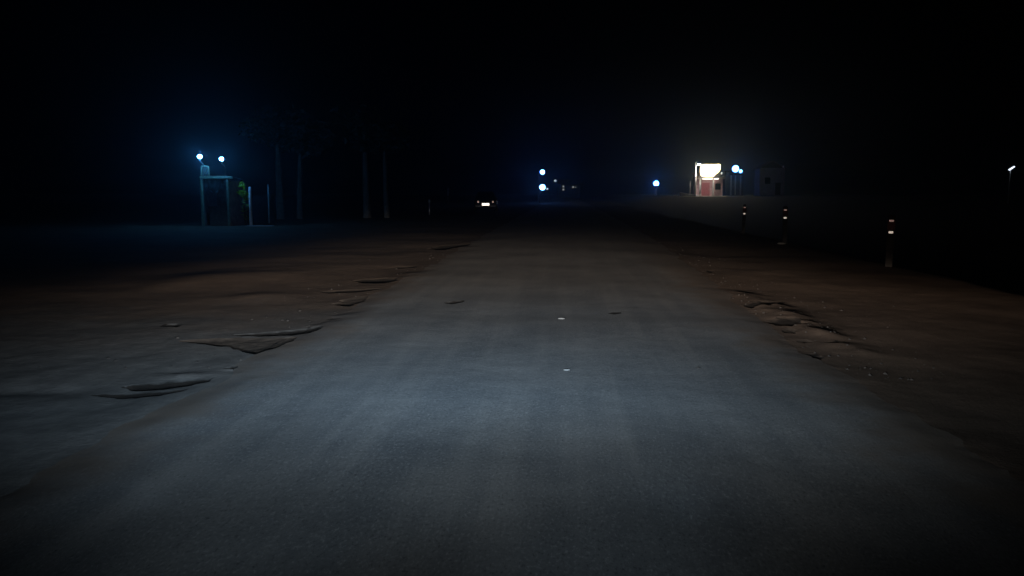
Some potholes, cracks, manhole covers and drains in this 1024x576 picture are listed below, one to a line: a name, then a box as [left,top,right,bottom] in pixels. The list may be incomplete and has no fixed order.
pothole [90,389,187,399]
pothole [121,378,213,391]
pothole [233,325,324,337]
pothole [743,300,785,309]
pothole [764,316,801,326]
pothole [179,337,297,355]
pothole [330,296,368,307]
